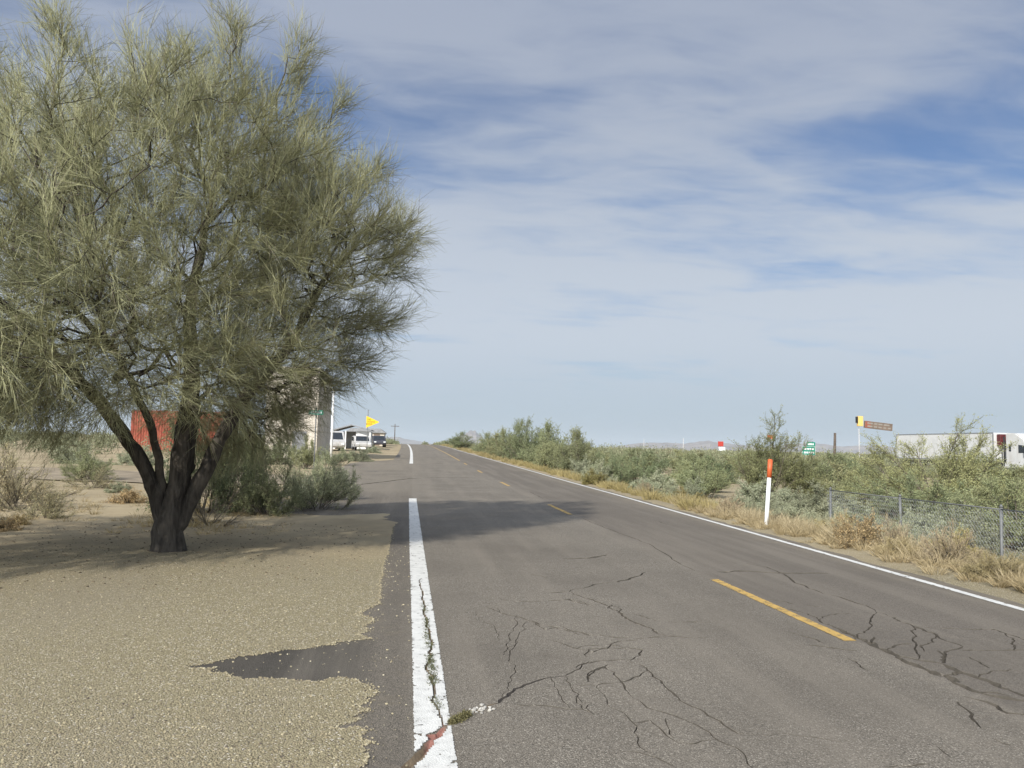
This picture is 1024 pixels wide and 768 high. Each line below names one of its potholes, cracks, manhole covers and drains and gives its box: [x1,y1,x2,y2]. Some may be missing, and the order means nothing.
crack [723,563,1024,745]
crack [401,572,838,768]
